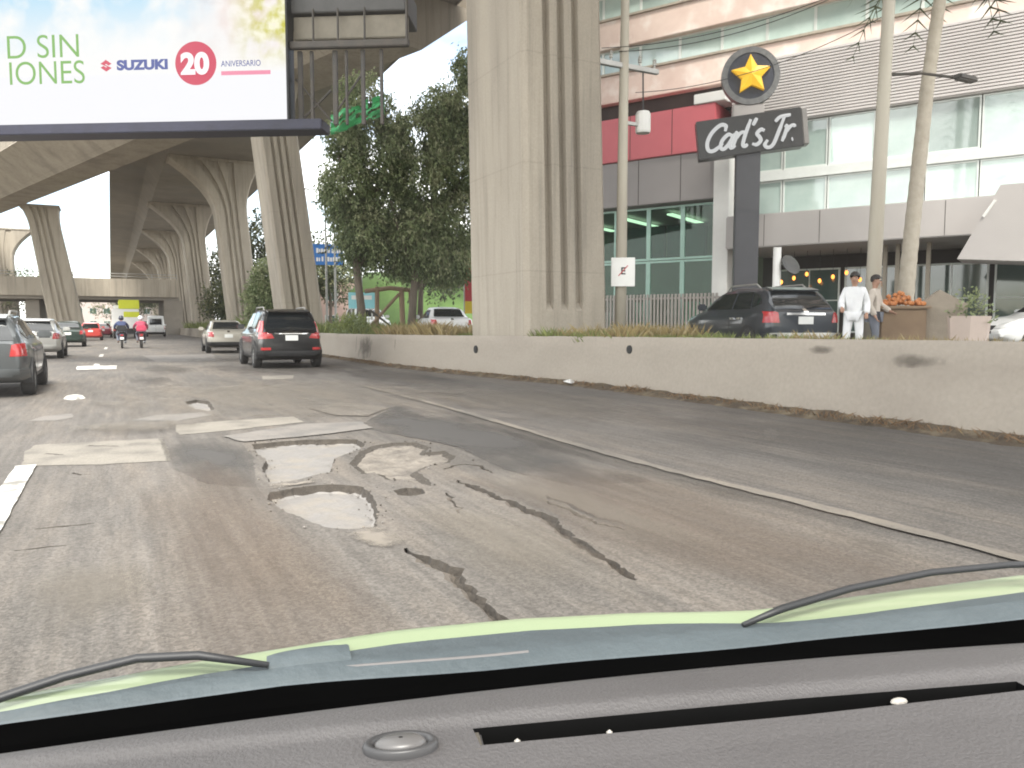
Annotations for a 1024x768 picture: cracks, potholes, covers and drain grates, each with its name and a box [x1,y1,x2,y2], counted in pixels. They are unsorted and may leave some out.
pothole [394,488,425,496]
crack [404,464,637,621]
pothole [186,400,215,411]
pothole [267,484,380,529]
pothole [251,439,365,484]
pothole [349,442,455,486]
